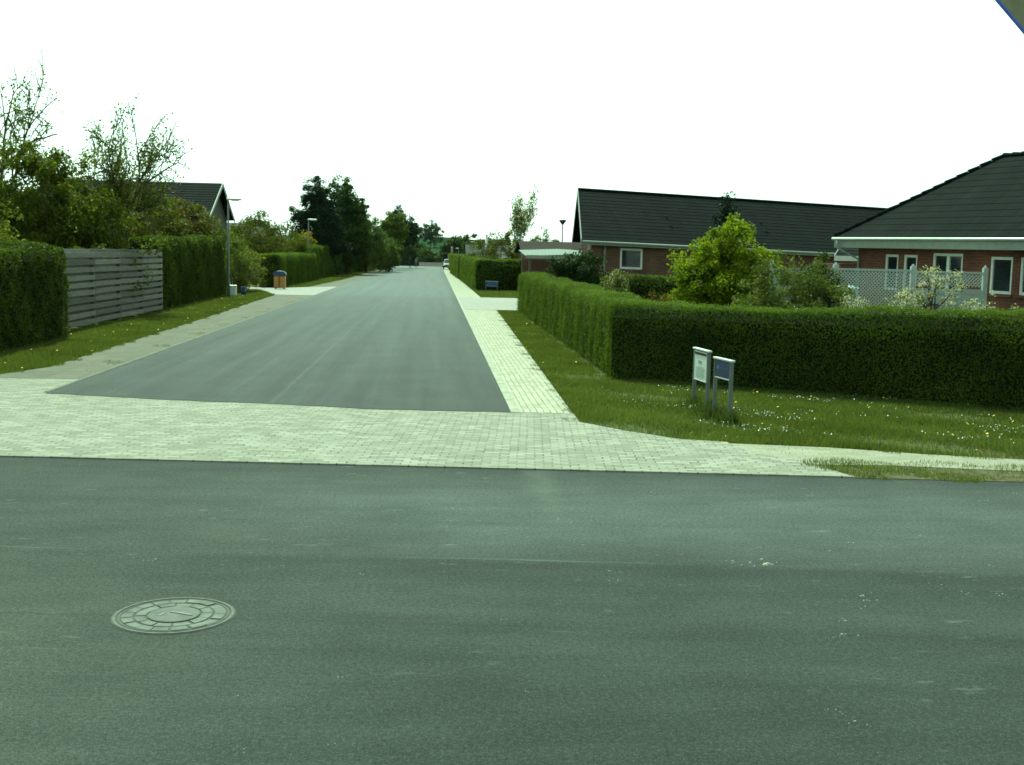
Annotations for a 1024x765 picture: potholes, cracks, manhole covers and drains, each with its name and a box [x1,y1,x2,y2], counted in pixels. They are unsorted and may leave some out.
manhole cover [110,597,236,635]
